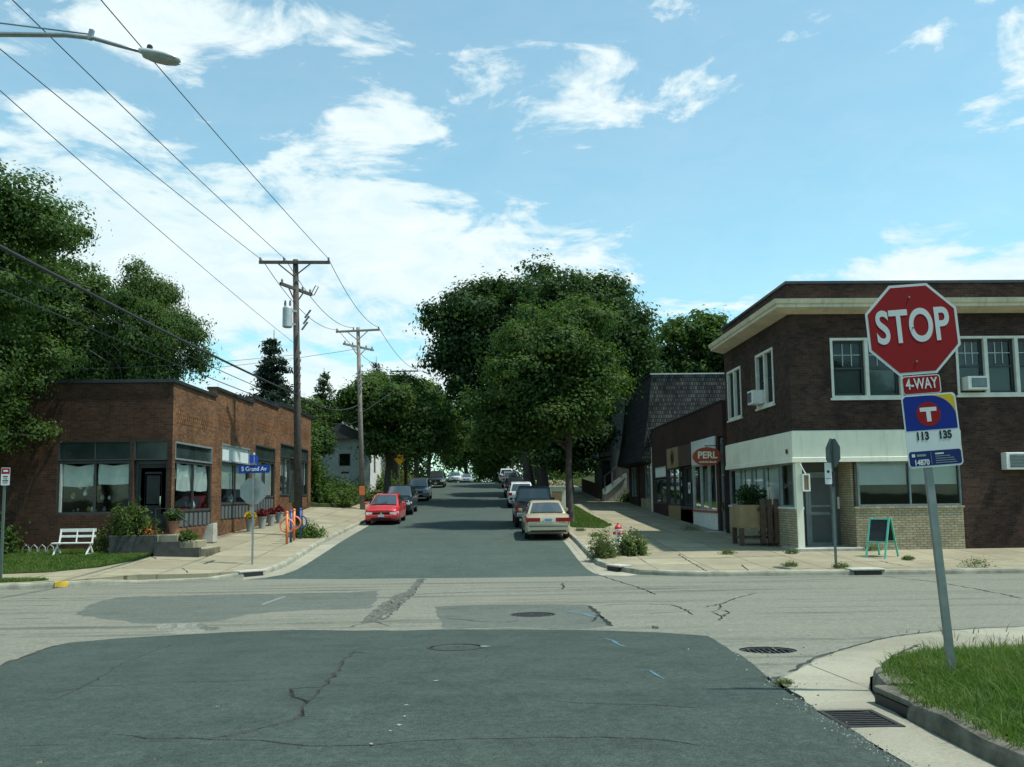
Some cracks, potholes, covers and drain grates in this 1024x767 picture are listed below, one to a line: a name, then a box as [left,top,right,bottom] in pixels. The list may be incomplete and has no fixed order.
drain grate [817,685,929,746]
drain grate [844,567,885,575]
crack [568,575,755,626]
crack [42,644,701,747]
drain grate [605,563,632,572]
